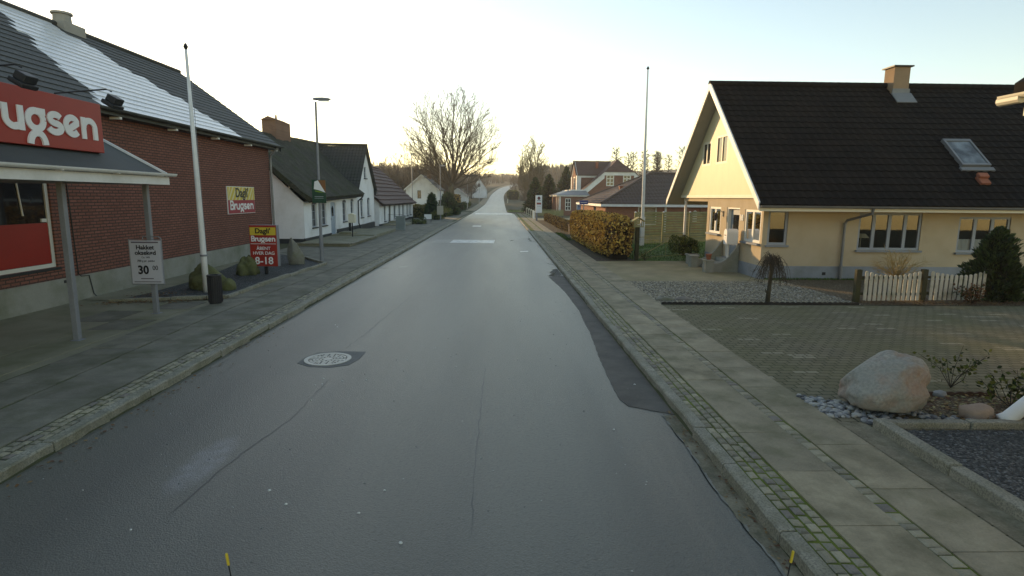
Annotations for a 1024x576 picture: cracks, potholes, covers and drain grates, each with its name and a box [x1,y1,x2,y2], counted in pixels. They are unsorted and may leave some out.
crack [168,384,325,515]
manhole cover [304,353,352,366]
crack [471,368,486,534]
